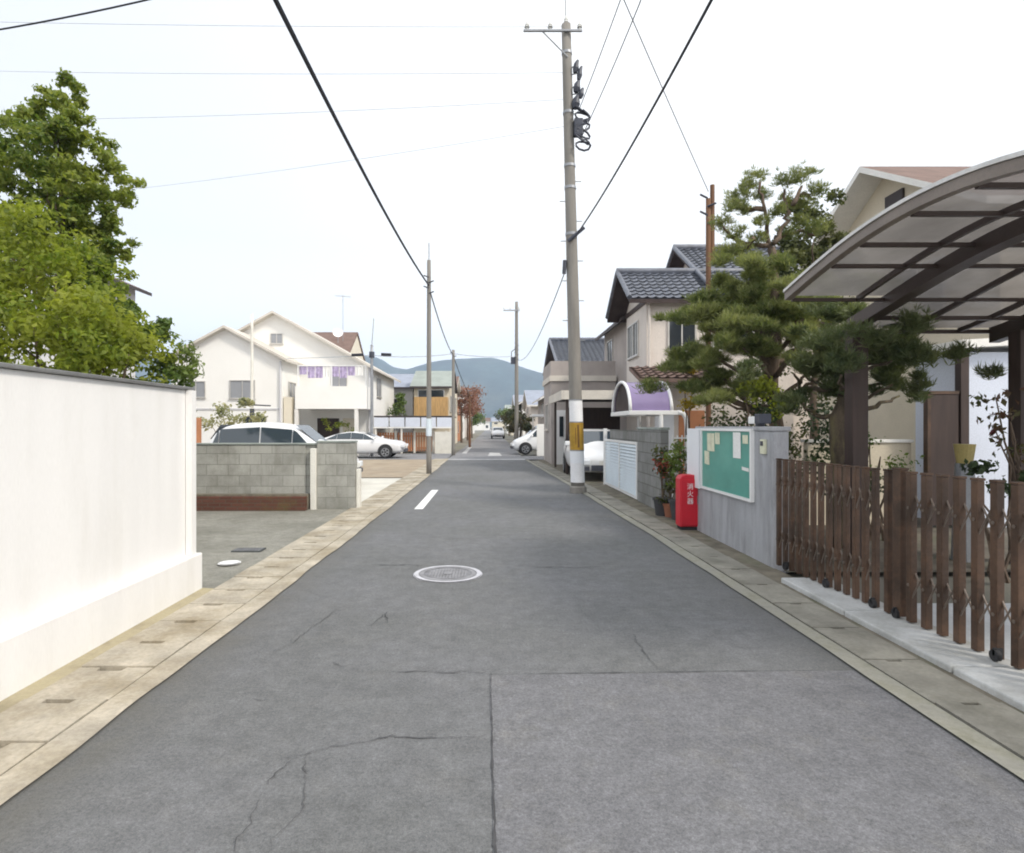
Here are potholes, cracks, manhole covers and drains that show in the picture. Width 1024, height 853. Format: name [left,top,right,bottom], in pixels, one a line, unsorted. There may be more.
crack [234,735,483,852]
manhole cover [413,565,482,583]
